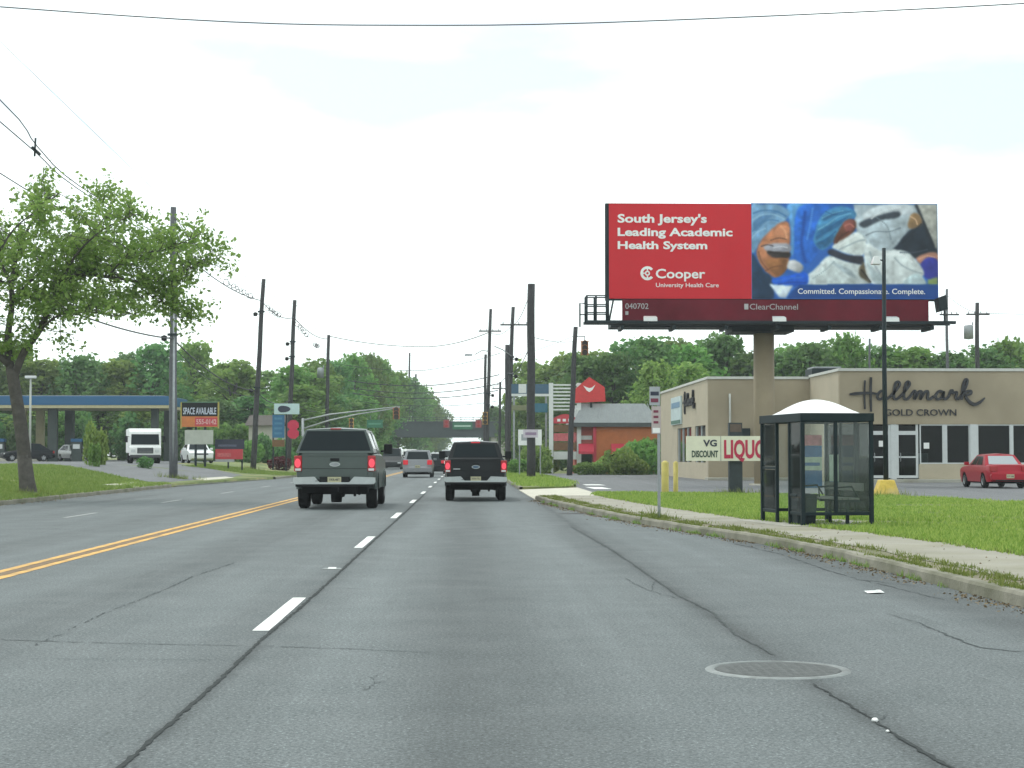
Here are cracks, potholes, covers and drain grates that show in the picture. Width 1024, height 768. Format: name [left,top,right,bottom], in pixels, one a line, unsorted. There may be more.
crack [571,526,955,768]
manhole cover [705,661,851,680]
crack [890,614,1011,651]
